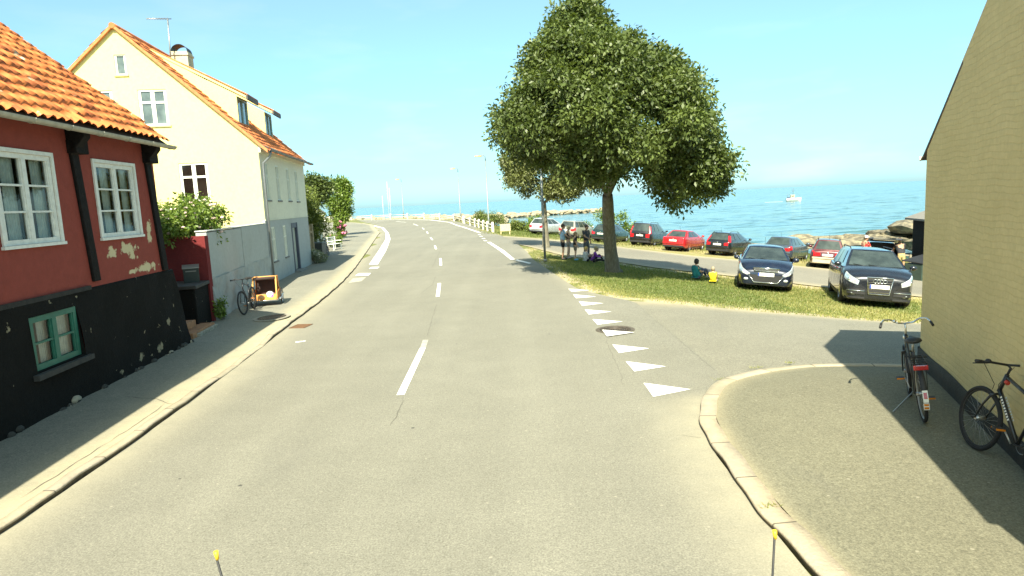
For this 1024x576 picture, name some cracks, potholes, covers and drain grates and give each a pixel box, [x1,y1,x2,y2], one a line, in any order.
manhole cover [253,313,290,322]
